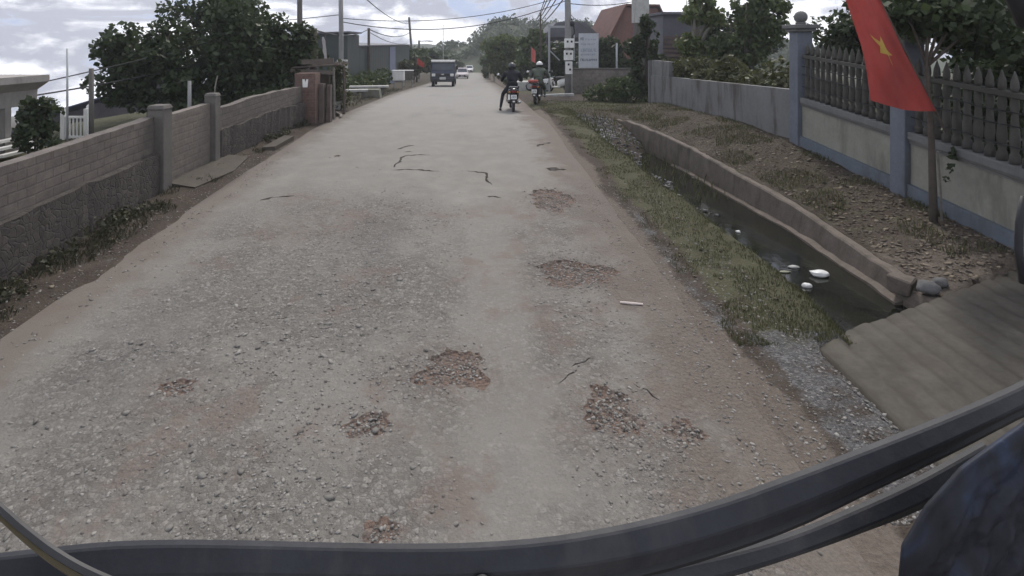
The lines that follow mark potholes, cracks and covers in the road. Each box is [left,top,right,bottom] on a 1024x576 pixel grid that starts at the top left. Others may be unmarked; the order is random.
pothole [532,189,576,213]
pothole [340,411,392,439]
pothole [661,418,710,445]
pothole [537,259,621,289]
pothole [583,384,645,436]
crack [394,145,432,171]
pothole [409,348,491,391]
pothole [155,378,198,397]
pothole [362,516,403,543]
crack [558,358,662,402]
crack [471,171,500,198]
